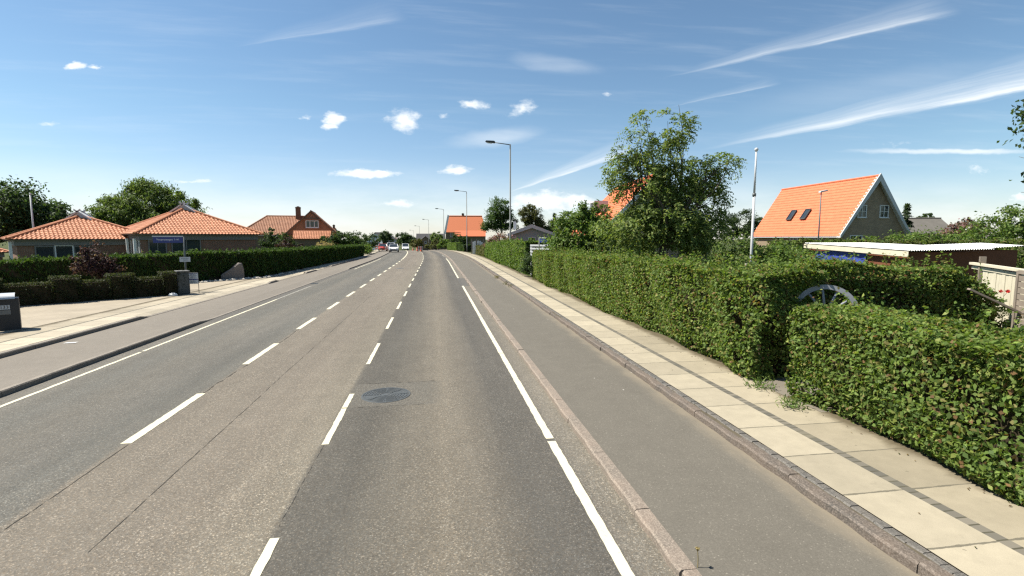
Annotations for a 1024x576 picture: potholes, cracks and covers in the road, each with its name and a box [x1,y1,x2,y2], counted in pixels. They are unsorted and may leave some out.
manhole cover [361,387,411,403]
